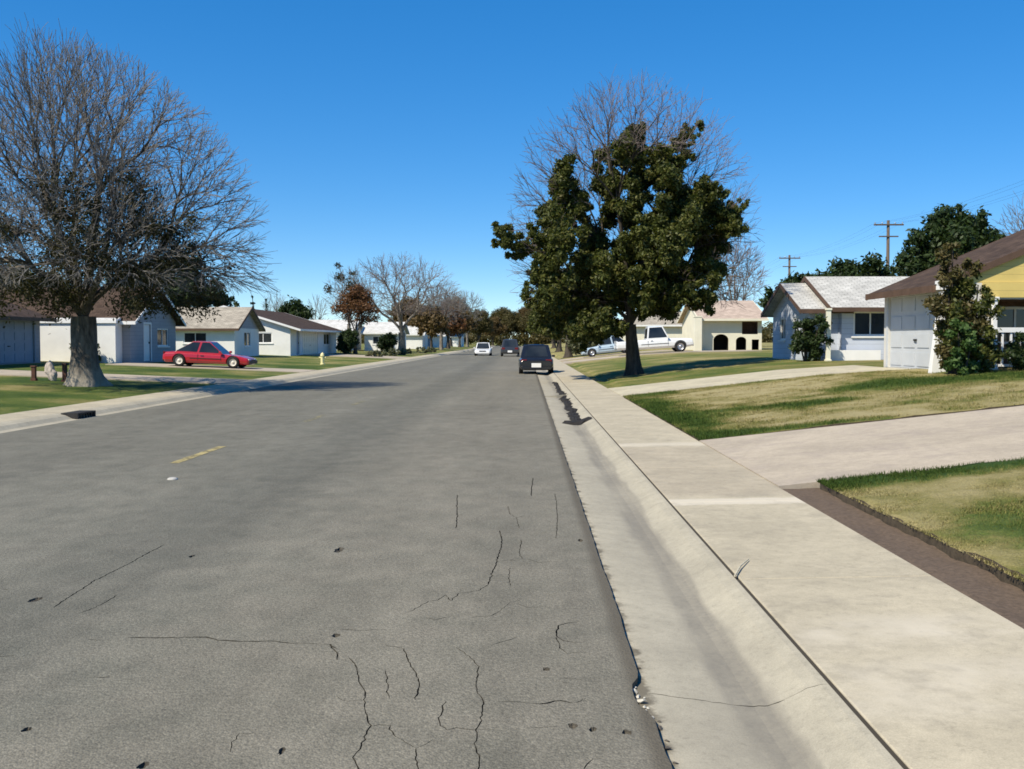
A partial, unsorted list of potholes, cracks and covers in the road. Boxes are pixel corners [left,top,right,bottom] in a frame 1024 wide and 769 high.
crack [131,629,517,769]
crack [650,684,822,707]
drain grate [61,410,96,419]
crack [409,508,541,620]
